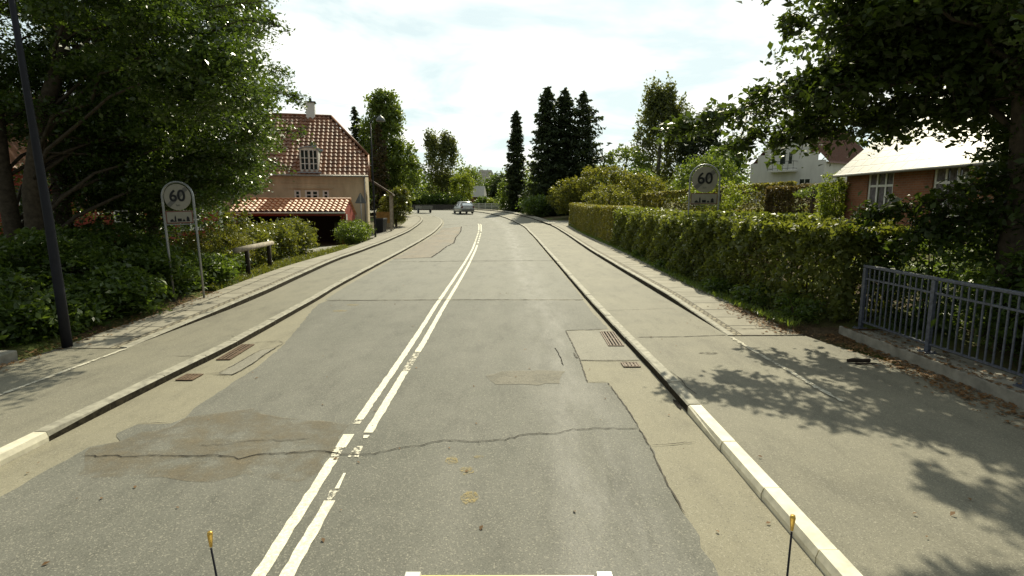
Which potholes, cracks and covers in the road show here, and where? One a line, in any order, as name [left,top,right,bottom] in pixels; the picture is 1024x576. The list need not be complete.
drain grate [600,331,624,346]
drain grate [216,344,255,360]
crack [86,428,621,459]
crack [555,329,589,382]
